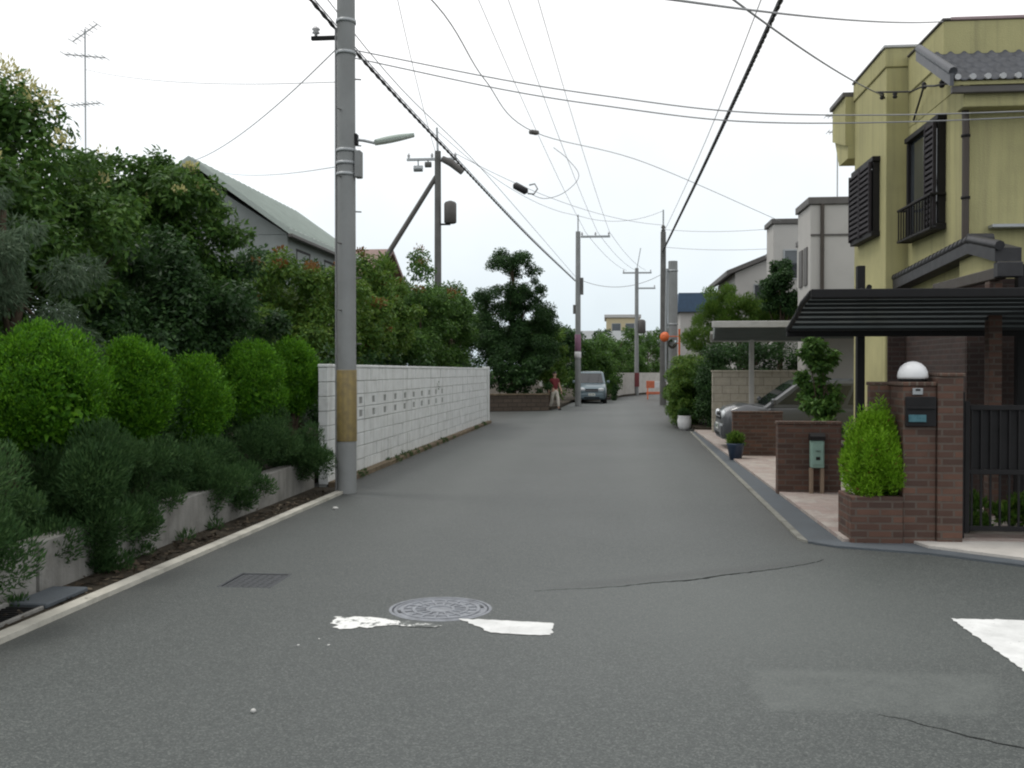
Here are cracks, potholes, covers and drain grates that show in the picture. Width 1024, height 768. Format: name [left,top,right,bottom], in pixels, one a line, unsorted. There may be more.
crack [544,560,822,591]
manhole cover [389,597,492,622]
crack [881,715,1024,749]
